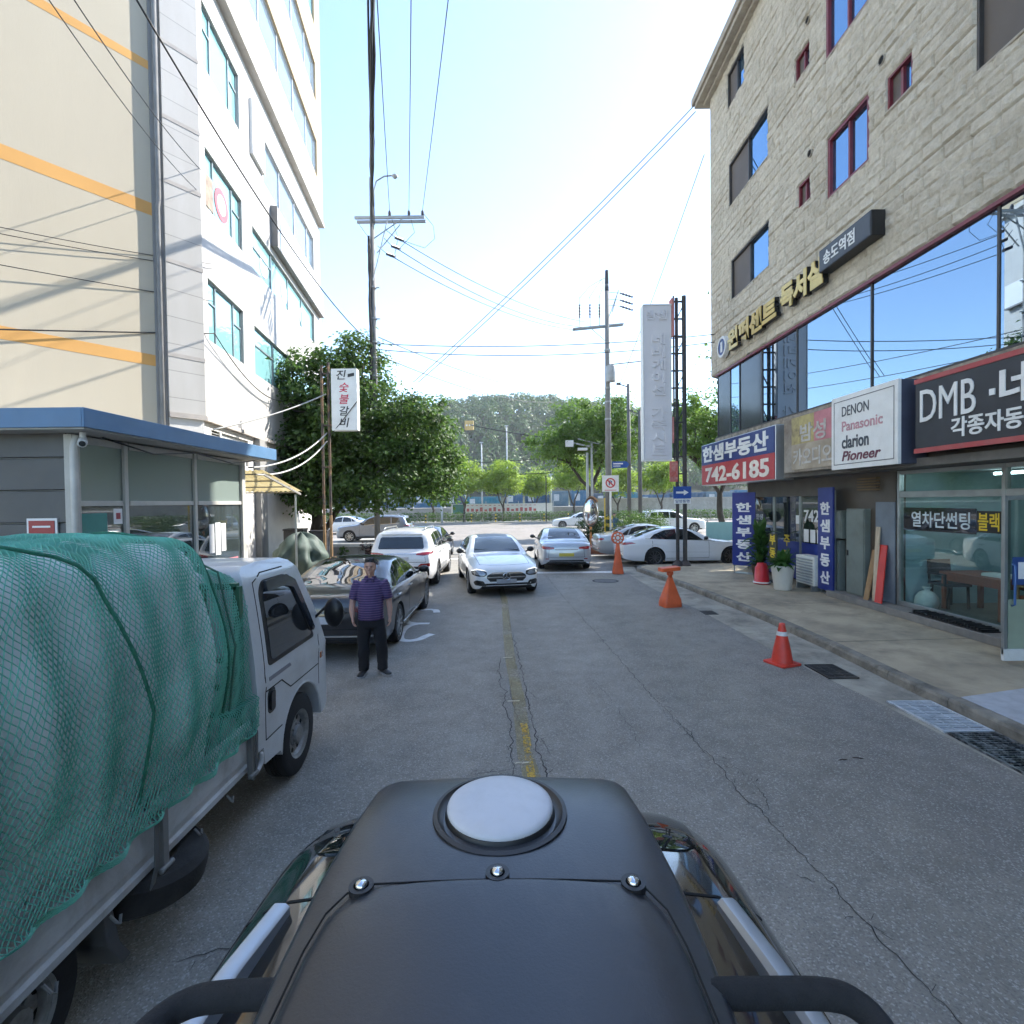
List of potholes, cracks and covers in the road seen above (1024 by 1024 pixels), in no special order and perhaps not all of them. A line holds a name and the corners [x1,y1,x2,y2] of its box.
crack [175,948,230,968]
drain grate [947,732,1024,775]
crack [469,600,552,777]
drain grate [805,664,859,679]
drain grate [887,700,995,733]
